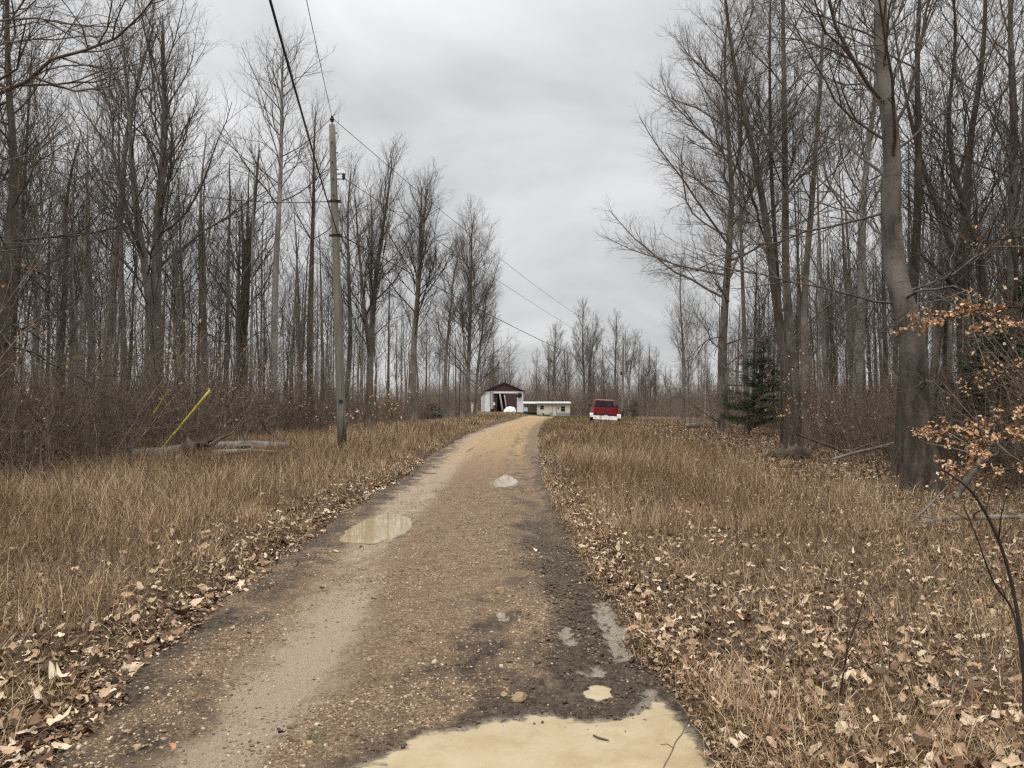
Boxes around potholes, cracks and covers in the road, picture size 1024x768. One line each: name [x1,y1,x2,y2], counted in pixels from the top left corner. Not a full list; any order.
pothole [486,473,521,487]
pothole [335,512,421,544]
pothole [325,685,731,768]
pothole [488,609,513,621]
pothole [576,676,618,702]
pothole [557,623,582,646]
pothole [586,598,645,663]
